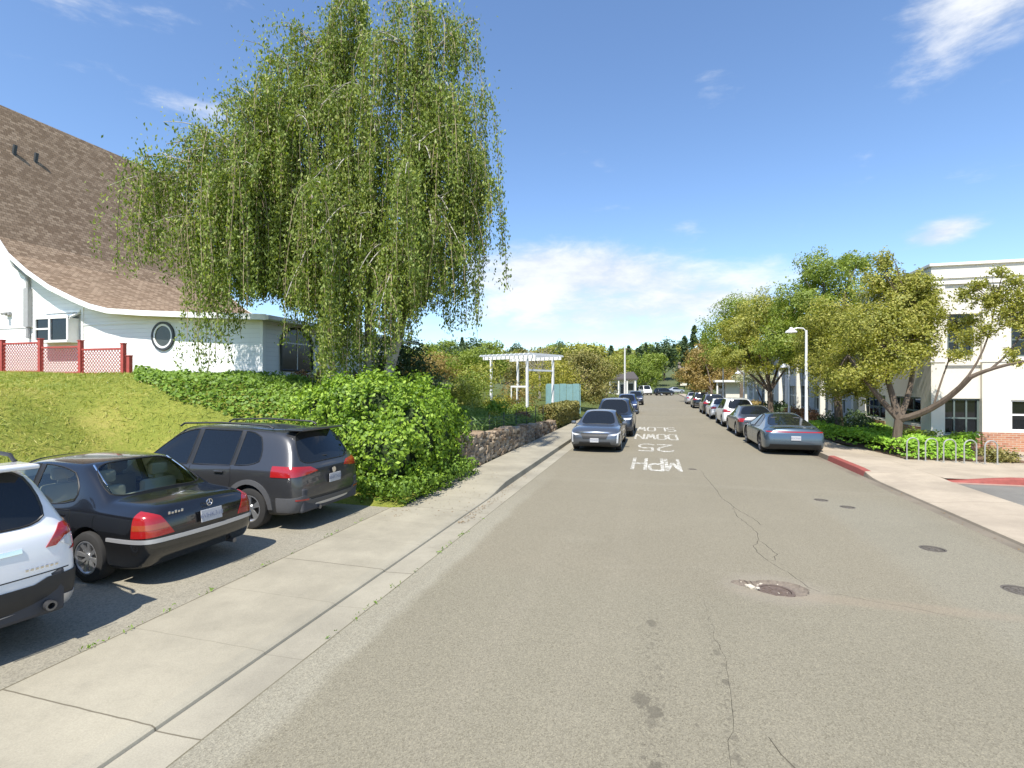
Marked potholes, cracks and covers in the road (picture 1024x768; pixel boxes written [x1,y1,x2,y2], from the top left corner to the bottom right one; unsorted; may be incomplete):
crack [702,472,817,591]
crack [708,618,734,764]
manhole cover [1000,585,1024,596]
manhole cover [756,584,796,597]
